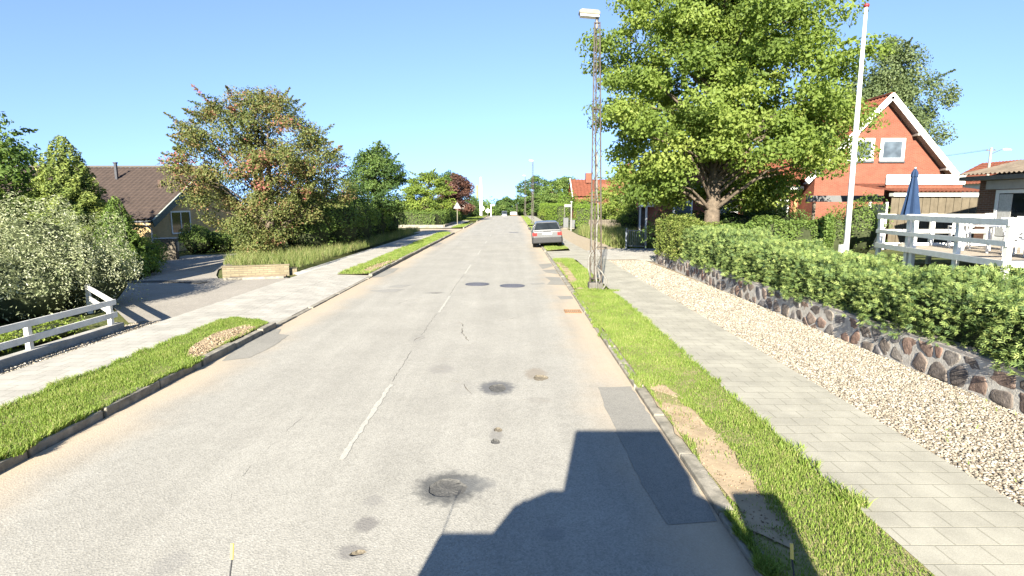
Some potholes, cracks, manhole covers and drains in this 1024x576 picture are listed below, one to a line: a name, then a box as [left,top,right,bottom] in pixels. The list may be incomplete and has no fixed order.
pothole [429,478,467,497]
pothole [489,384,506,393]
